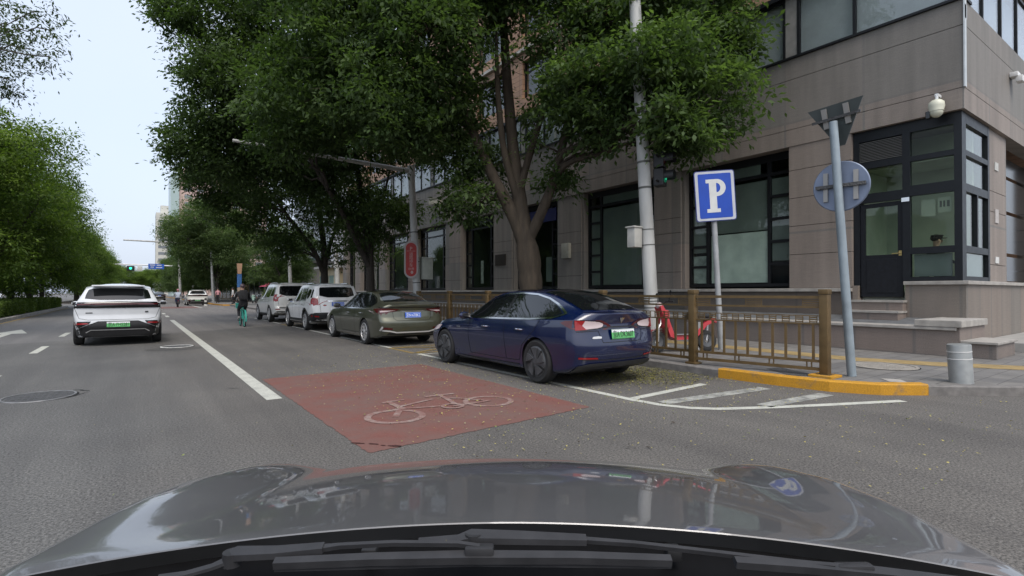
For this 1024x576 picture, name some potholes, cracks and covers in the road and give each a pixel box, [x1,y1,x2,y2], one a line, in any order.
manhole cover [0,390,79,403]
manhole cover [856,361,921,370]
